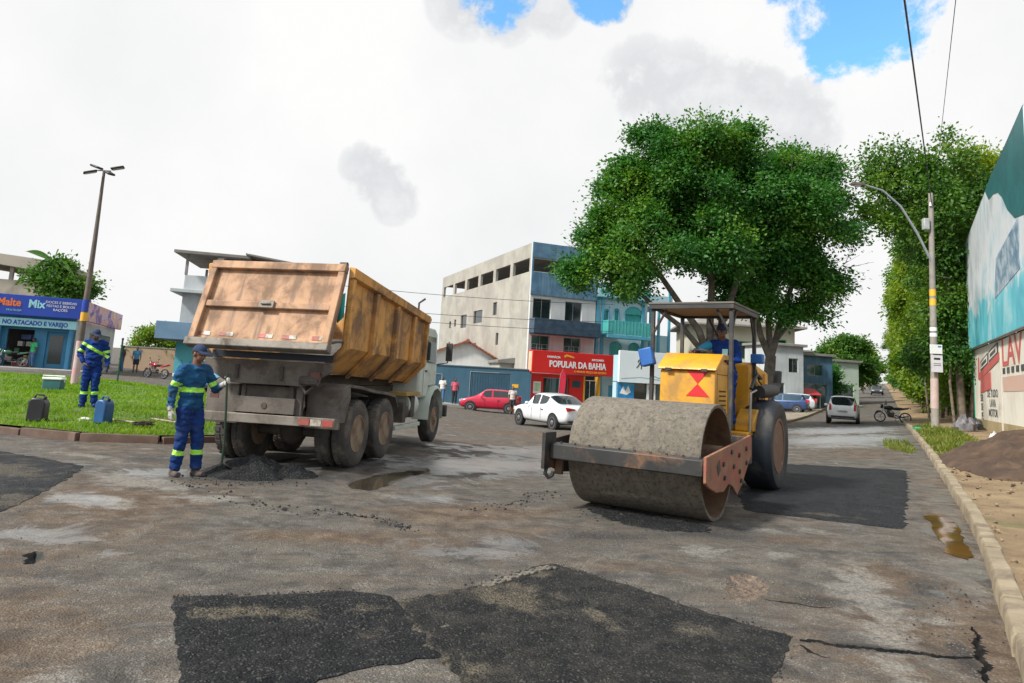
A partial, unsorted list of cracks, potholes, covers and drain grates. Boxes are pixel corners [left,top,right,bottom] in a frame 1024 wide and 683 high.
pothole [346,467,431,491]
crack [764,599,829,608]
pothole [22,551,45,564]
crack [800,626,995,683]
